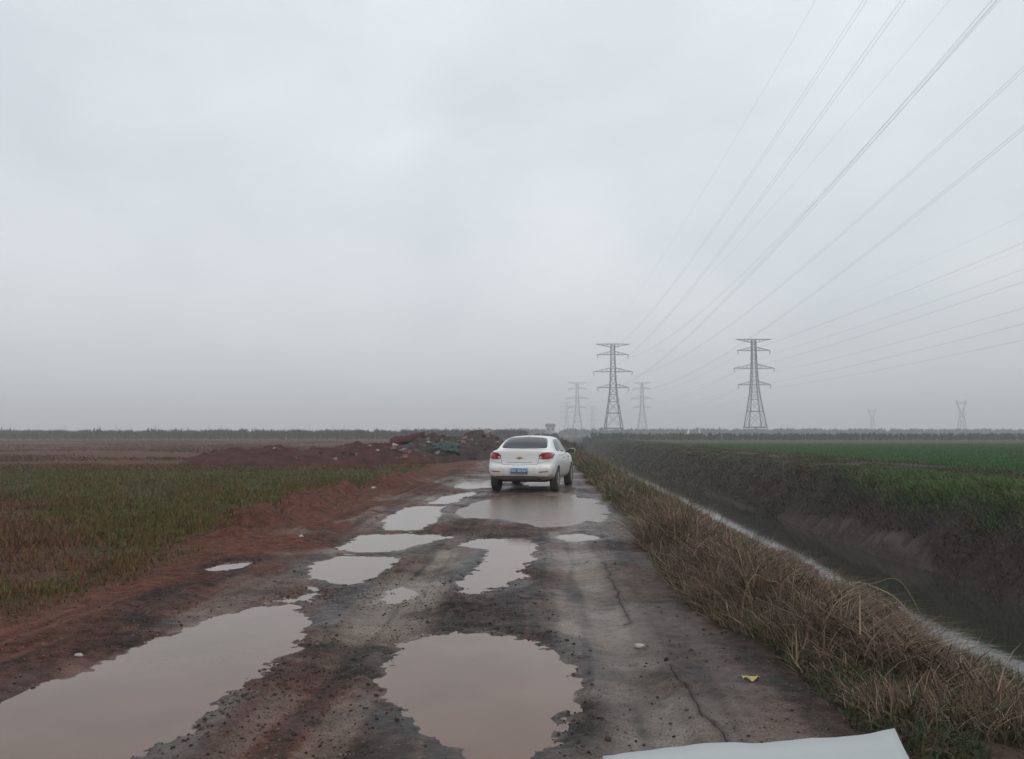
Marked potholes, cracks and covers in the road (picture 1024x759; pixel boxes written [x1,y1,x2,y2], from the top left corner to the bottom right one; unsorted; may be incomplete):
pothole [445,535,546,595]
pothole [549,531,608,542]
pothole [365,584,427,605]
pothole [330,531,458,556]
pothole [366,624,594,759]
pothole [374,504,452,533]
crack [660,663,738,743]
pothole [0,600,323,759]
pothole [291,553,408,590]
